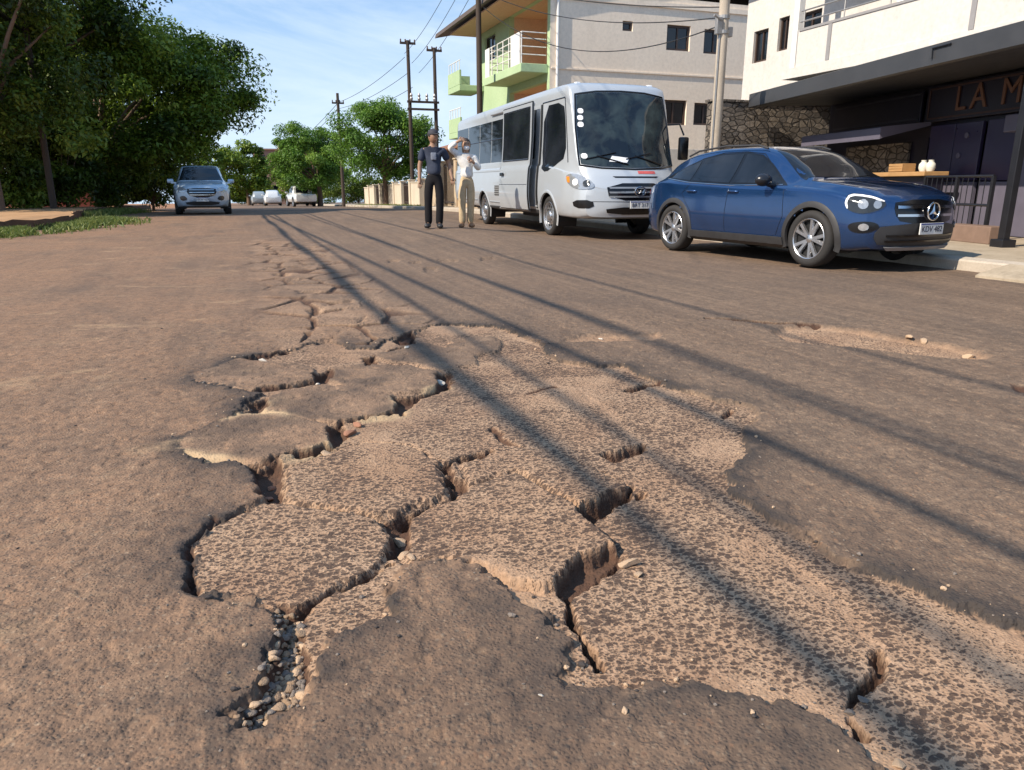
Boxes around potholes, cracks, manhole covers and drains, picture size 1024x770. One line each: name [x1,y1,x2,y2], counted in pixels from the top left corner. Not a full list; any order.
crack [703,317,822,330]
crack [621,379,664,393]
crack [298,426,520,618]
crack [523,385,559,396]
